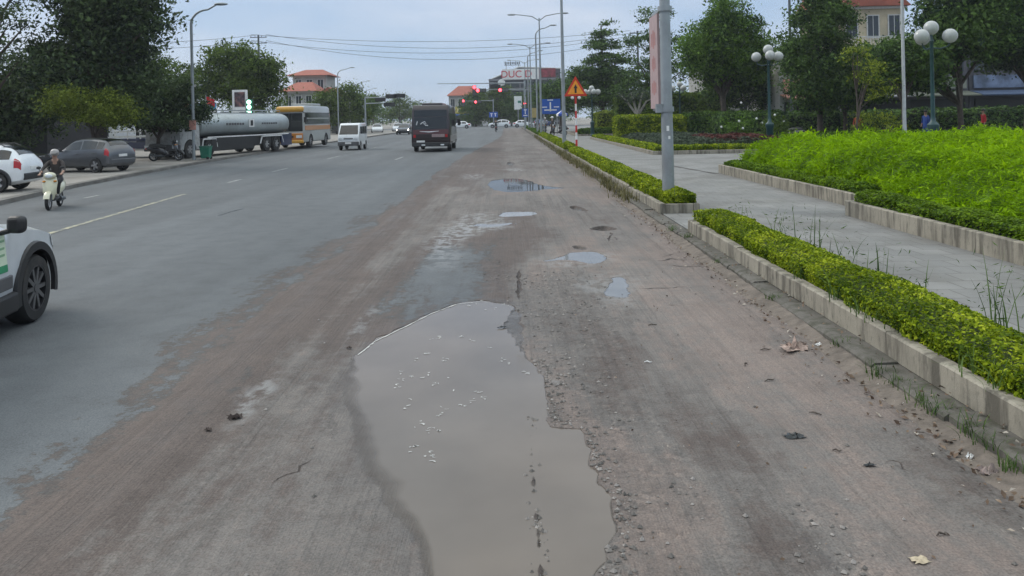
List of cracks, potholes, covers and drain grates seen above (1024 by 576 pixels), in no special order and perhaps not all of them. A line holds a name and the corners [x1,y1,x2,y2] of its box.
pothole [488,179,563,192]
pothole [341,300,618,576]
crack [271,461,309,487]
pothole [604,277,631,298]
pothole [543,251,607,264]
